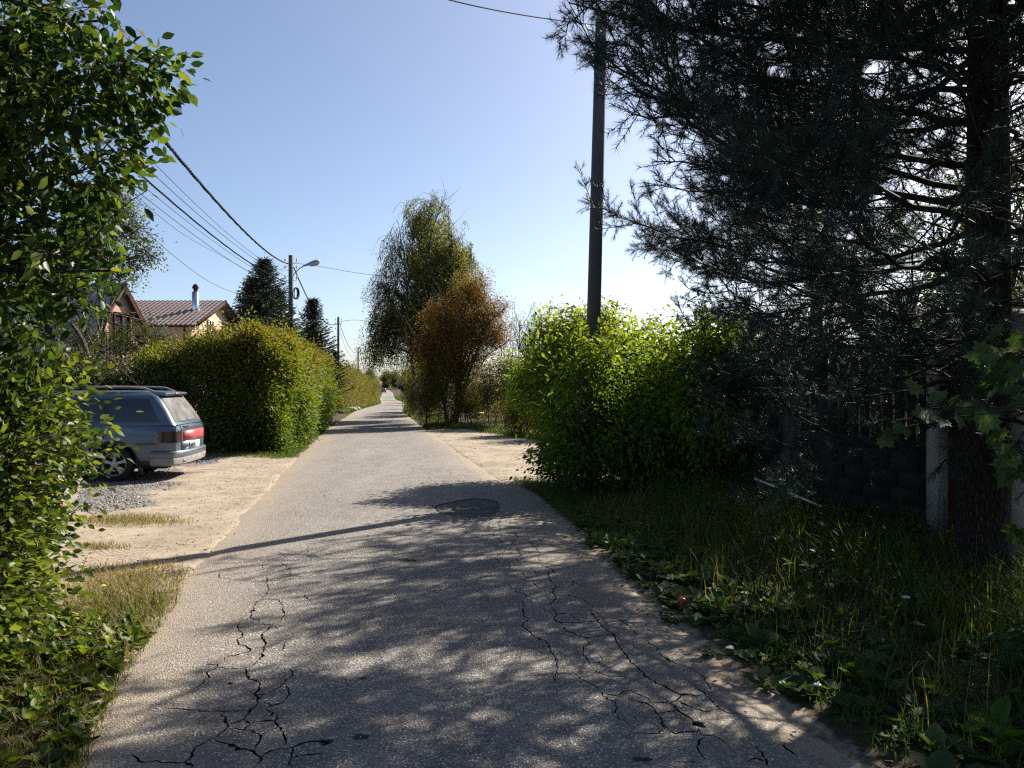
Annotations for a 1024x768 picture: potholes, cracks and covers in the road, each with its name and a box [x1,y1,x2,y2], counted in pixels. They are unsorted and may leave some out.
crack [132,562,352,768]
crack [487,520,742,763]
